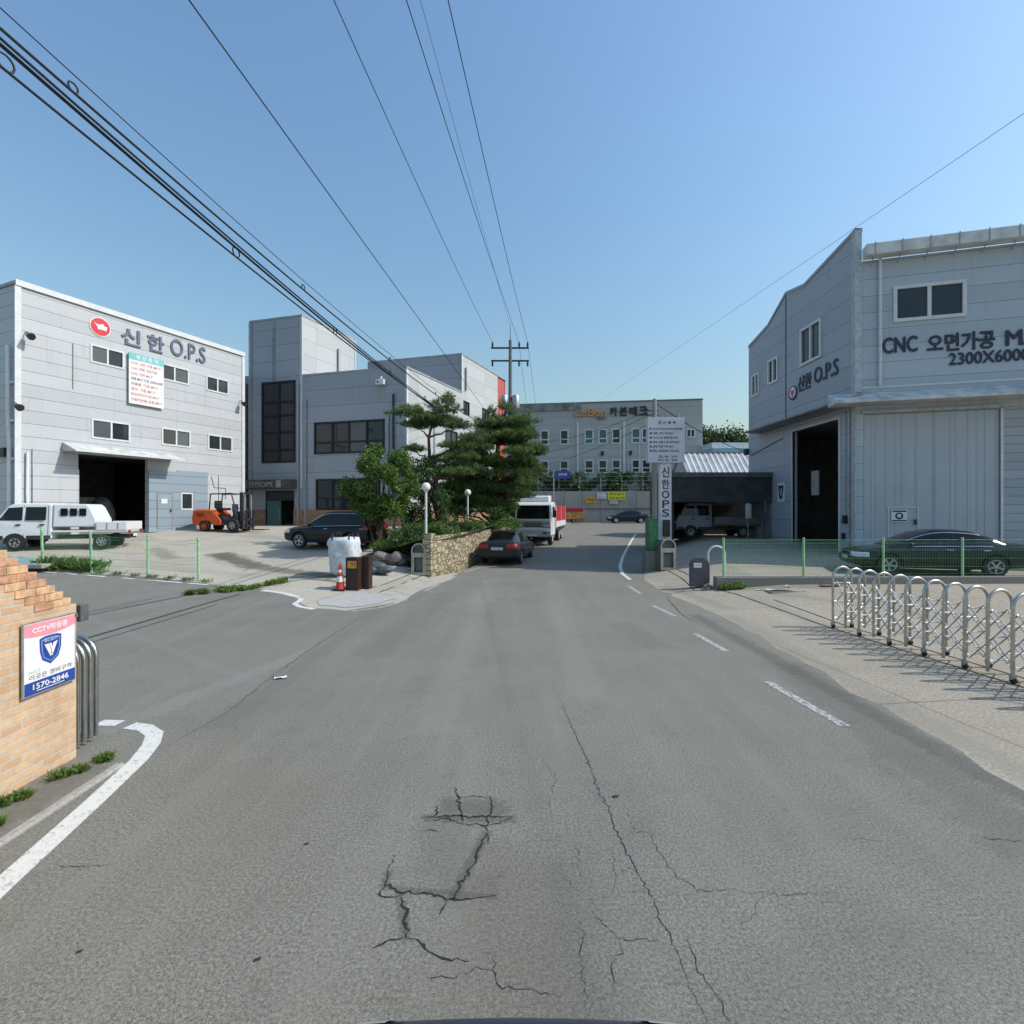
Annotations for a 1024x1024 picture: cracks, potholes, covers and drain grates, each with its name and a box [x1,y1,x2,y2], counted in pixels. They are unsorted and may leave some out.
crack [543,704,834,1024]
crack [373,787,564,997]
